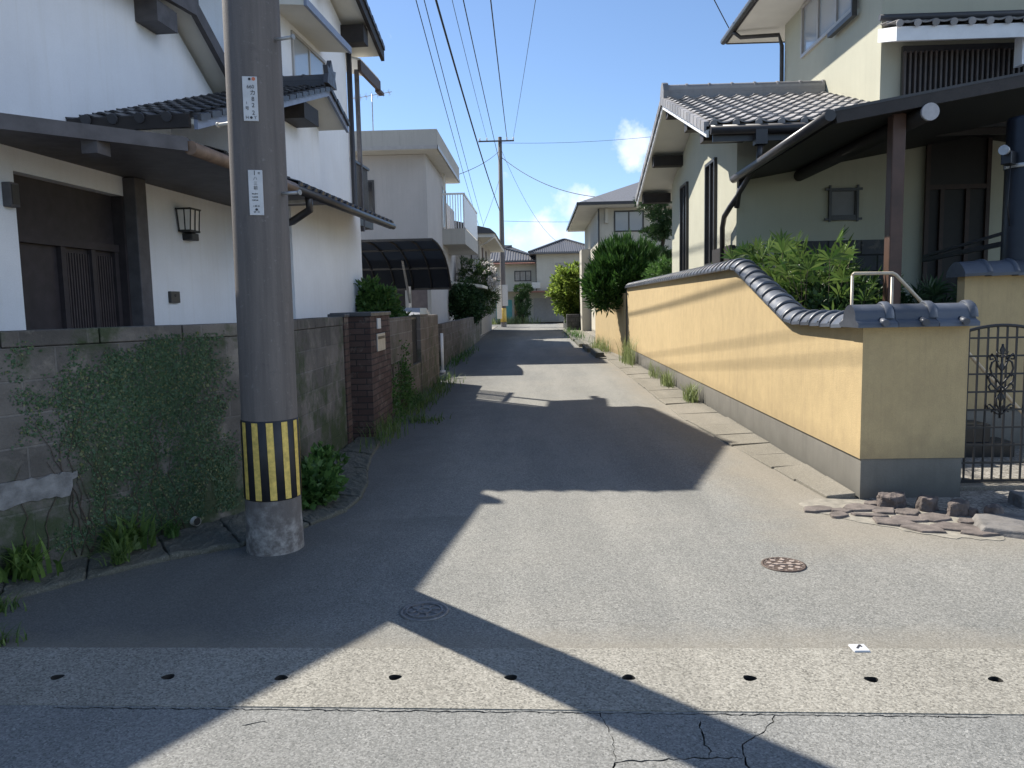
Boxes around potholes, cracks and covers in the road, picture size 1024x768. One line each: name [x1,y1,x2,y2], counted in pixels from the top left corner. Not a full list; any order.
manhole cover [400,601,449,621]
crack [56,707,988,768]
manhole cover [761,557,807,572]
